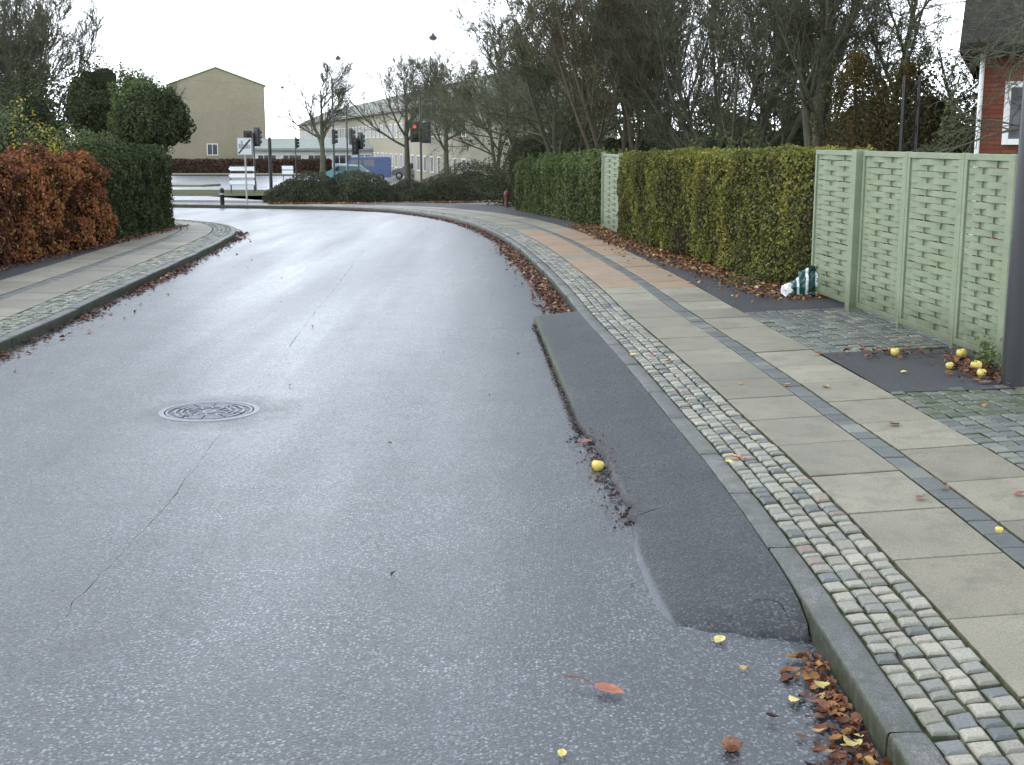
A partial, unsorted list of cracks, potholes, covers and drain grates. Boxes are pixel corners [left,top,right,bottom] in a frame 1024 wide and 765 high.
crack [52,436,220,635]
manhole cover [158,401,260,422]
